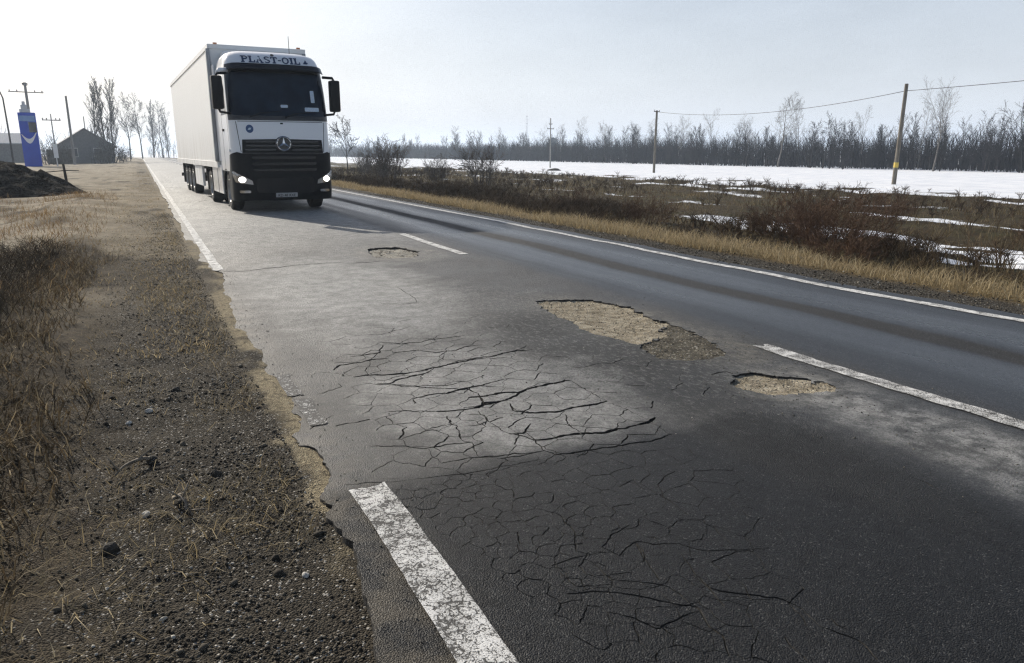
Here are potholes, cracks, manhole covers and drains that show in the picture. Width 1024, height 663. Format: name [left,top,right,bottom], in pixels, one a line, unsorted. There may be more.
pothole [367,247,420,258]
pothole [536,299,726,361]
crack [313,315,710,479]
crack [346,447,878,663]
pothole [711,371,837,395]
